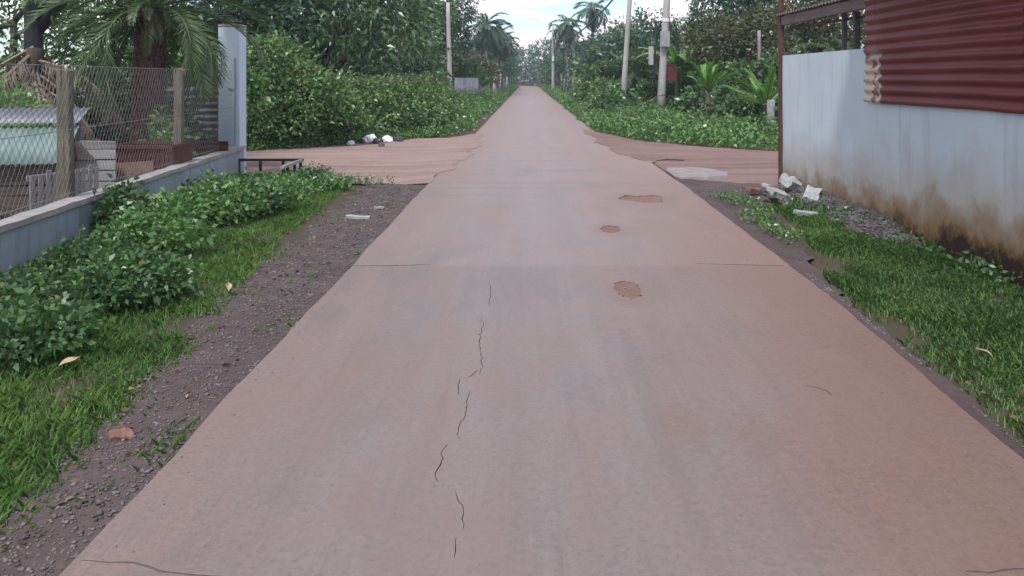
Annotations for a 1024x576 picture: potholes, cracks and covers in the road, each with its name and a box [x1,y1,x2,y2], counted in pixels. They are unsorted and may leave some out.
crack [435,282,491,558]
pothole [614,281,642,299]
pothole [619,195,663,203]
pothole [600,225,621,233]
